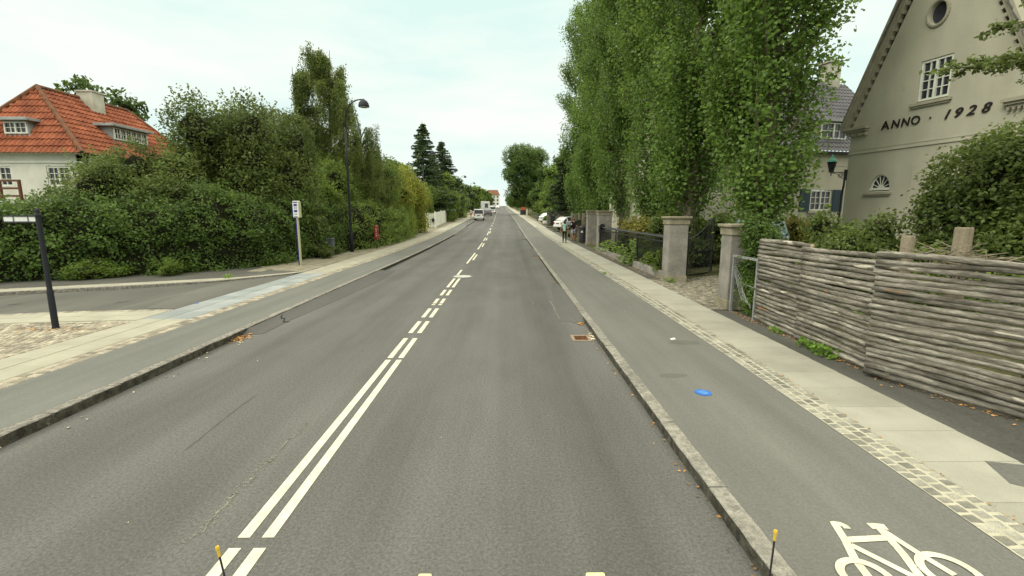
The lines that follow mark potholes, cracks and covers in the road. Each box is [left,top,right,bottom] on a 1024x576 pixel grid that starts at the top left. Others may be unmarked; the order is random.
crack [181,422,310,543]
